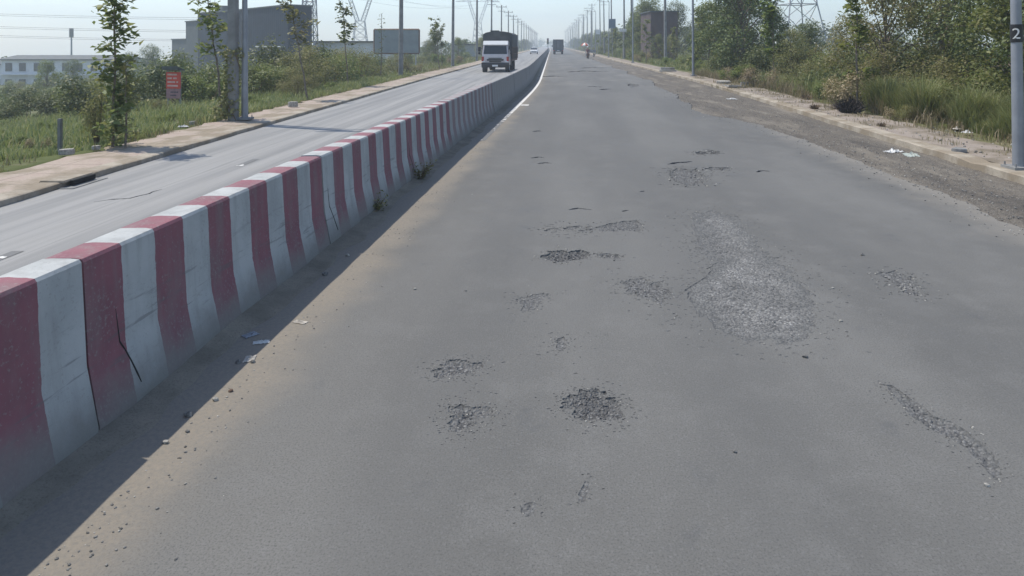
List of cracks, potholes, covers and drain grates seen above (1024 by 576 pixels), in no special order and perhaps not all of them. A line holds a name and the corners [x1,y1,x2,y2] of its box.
pothole [535,373,648,437]
drain grate [39,172,107,189]
pothole [534,246,599,265]
